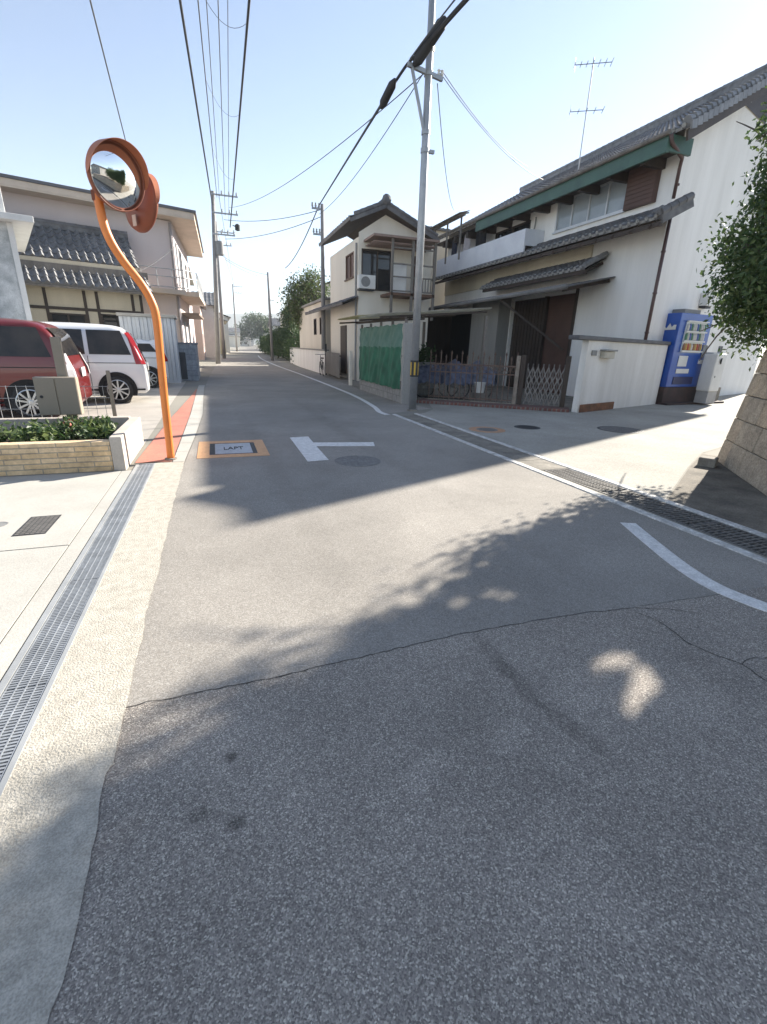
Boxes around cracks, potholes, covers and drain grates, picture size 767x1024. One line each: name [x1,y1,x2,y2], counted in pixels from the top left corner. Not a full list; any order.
drain grate [690,522,767,557]
drain grate [604,491,718,527]
manhole cover [335,455,381,467]
drain grate [544,469,630,494]
crack [128,594,767,707]
utility cover [197,440,270,459]
